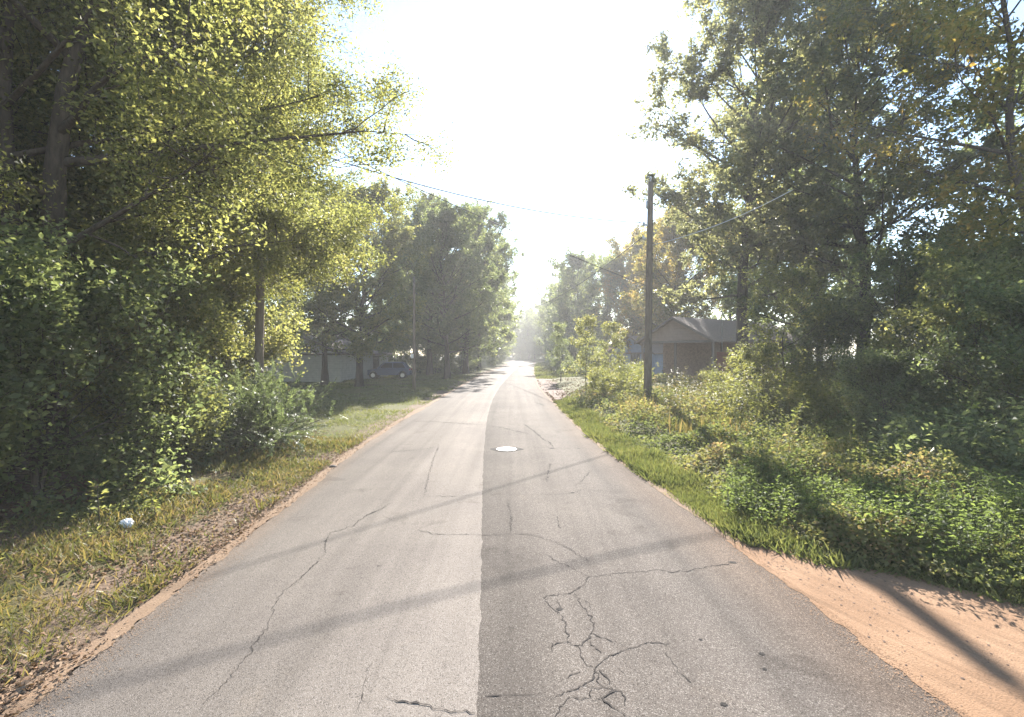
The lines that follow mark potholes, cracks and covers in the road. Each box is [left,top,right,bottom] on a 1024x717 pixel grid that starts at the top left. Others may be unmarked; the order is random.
crack [196,508,383,712]
crack [418,425,623,532]
crack [386,554,691,716]
